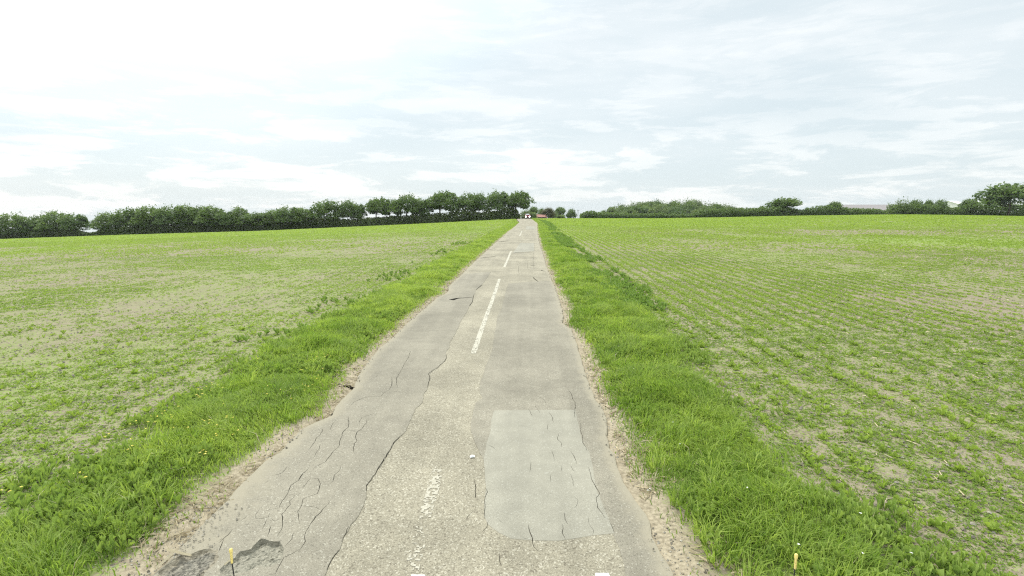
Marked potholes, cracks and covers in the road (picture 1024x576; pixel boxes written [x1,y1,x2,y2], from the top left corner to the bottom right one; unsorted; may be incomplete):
pothole [219,539,284,576]
crack [467,391,614,538]
pothole [157,549,219,576]
crack [219,353,410,574]
